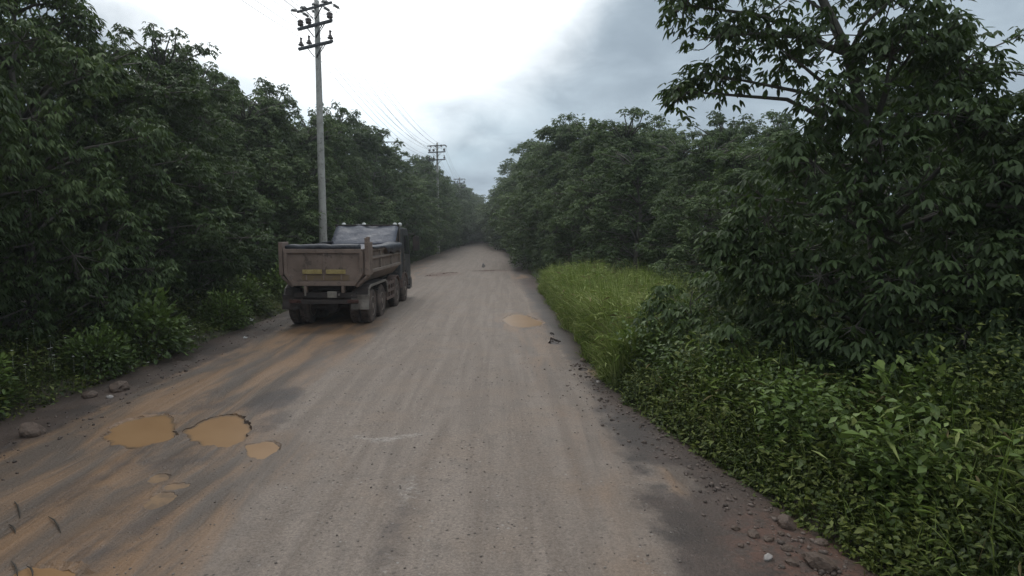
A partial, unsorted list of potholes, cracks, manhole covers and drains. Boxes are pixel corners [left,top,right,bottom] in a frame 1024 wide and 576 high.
pothole [182,413,252,447]
pothole [147,473,171,483]
pothole [162,482,191,490]
pothole [243,440,282,460]
pothole [5,561,95,576]
pothole [502,314,545,328]
pothole [143,491,178,510]
pothole [99,413,179,449]
